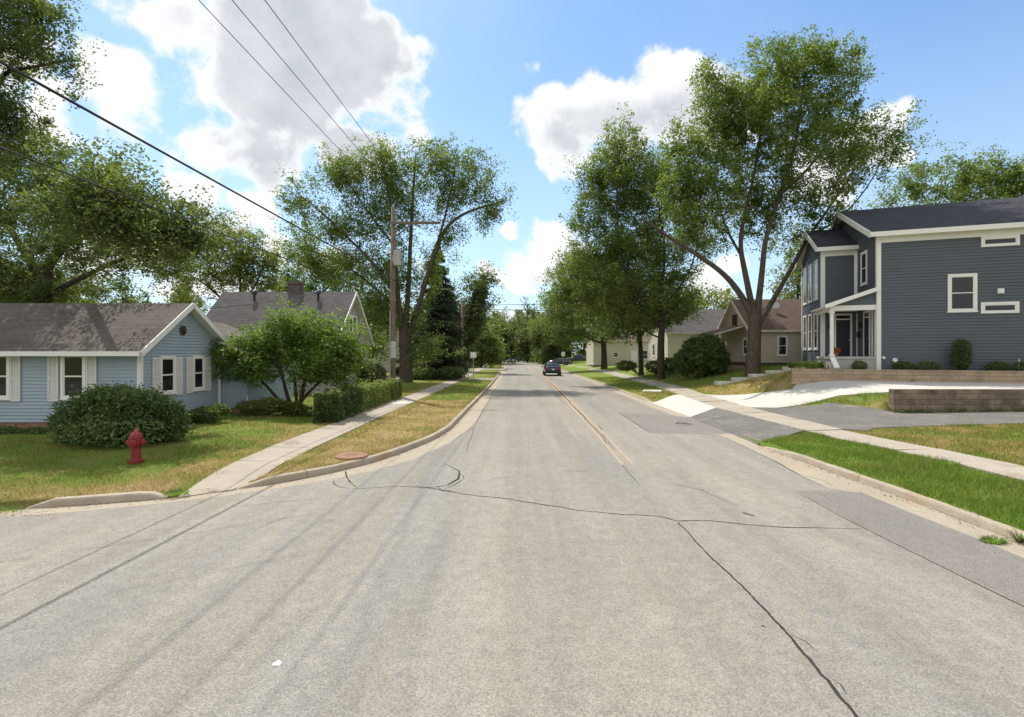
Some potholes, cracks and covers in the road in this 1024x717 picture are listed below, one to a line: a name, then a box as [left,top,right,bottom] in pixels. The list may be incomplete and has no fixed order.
manhole cover [335,452,368,460]
crack [234,463,847,529]
